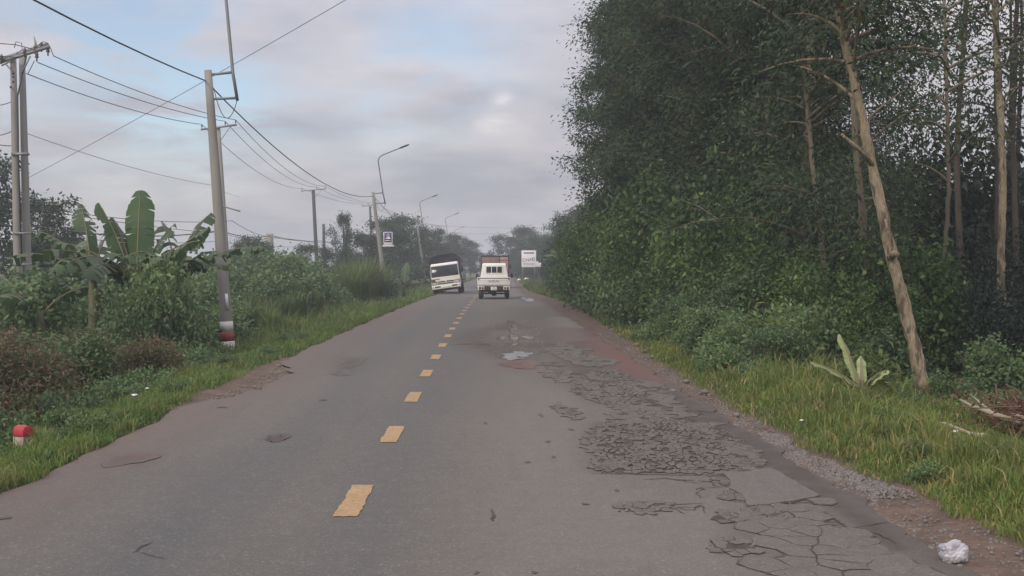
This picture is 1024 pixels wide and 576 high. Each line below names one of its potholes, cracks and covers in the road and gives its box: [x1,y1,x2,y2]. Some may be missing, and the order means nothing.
crack [536,343,950,576]
pothole [492,348,540,361]
